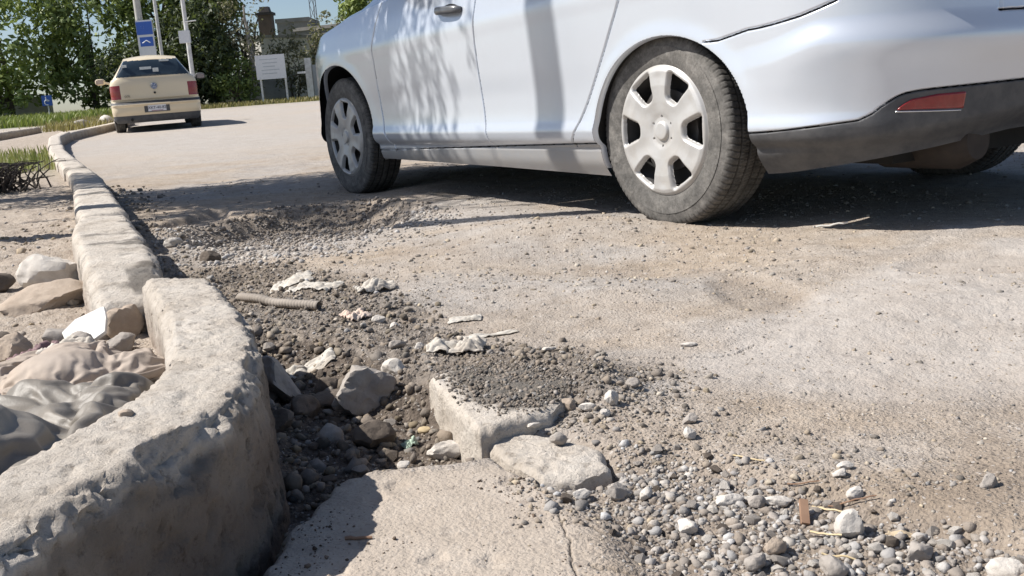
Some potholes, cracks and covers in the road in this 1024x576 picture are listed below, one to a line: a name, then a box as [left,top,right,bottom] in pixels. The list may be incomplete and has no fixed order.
crack [555,510,706,576]
pothole [196,266,296,303]
pothole [255,333,488,576]
